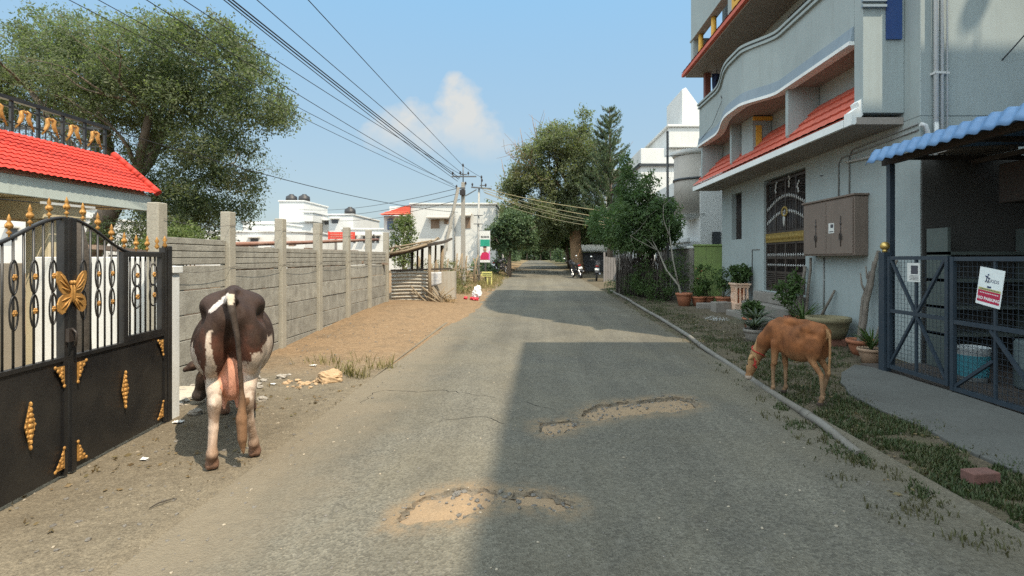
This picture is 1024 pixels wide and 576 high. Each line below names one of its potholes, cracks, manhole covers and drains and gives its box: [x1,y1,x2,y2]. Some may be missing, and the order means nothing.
pothole [536,418,584,436]
pothole [501,489,589,512]
pothole [382,485,508,525]
pothole [579,395,699,421]
